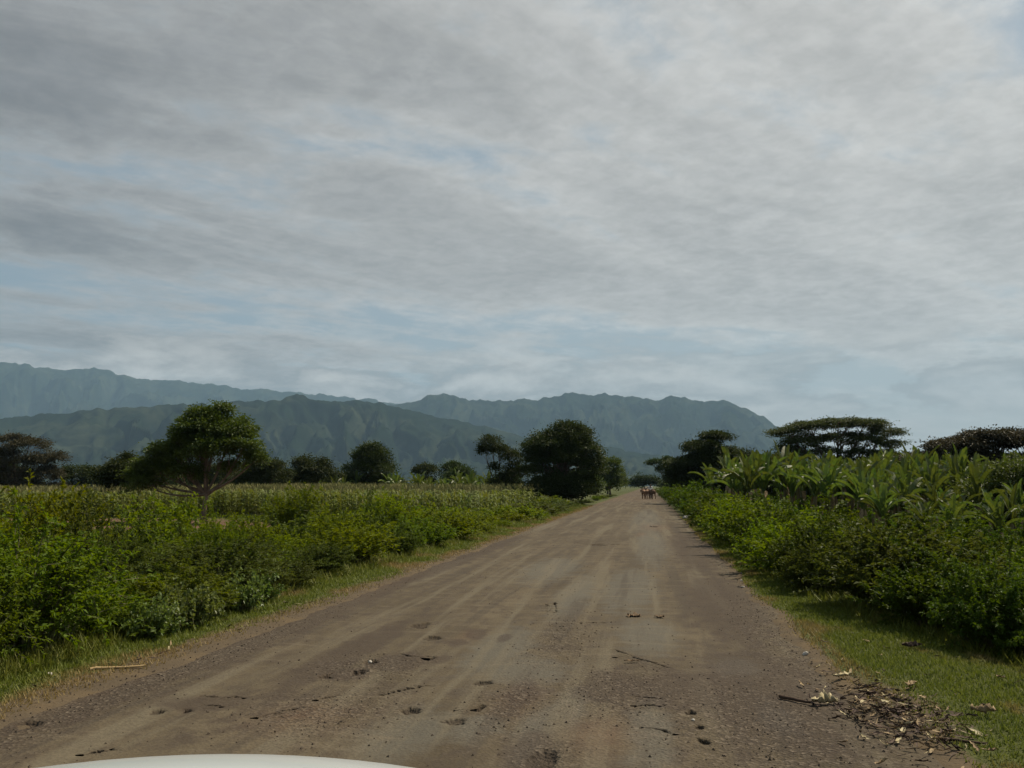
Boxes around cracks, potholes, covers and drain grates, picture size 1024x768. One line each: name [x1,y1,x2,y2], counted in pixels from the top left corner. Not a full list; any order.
pothole [409,654,446,664]
pothole [402,621,437,631]
pothole [510,744,573,768]
pothole [389,704,432,719]
pothole [330,667,378,679]
pothole [462,678,503,689]
pothole [0,717,58,734]
pothole [136,706,185,720]
pothole [428,715,477,730]
